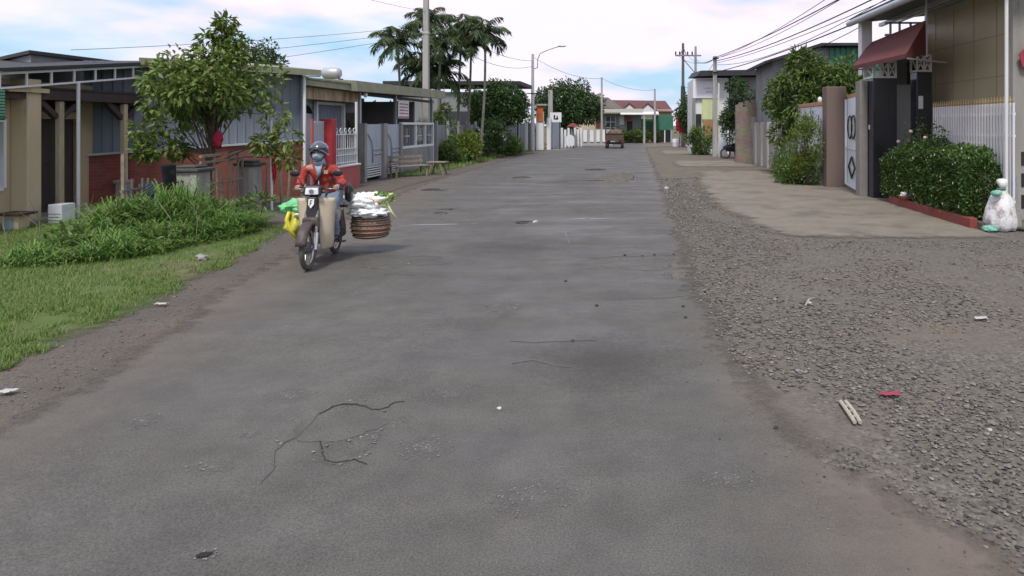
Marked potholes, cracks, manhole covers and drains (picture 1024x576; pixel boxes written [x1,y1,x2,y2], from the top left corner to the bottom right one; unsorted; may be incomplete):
crack [320,441,366,464]
crack [319,401,405,414]
pothole [194,548,220,561]
crack [510,339,593,367]
